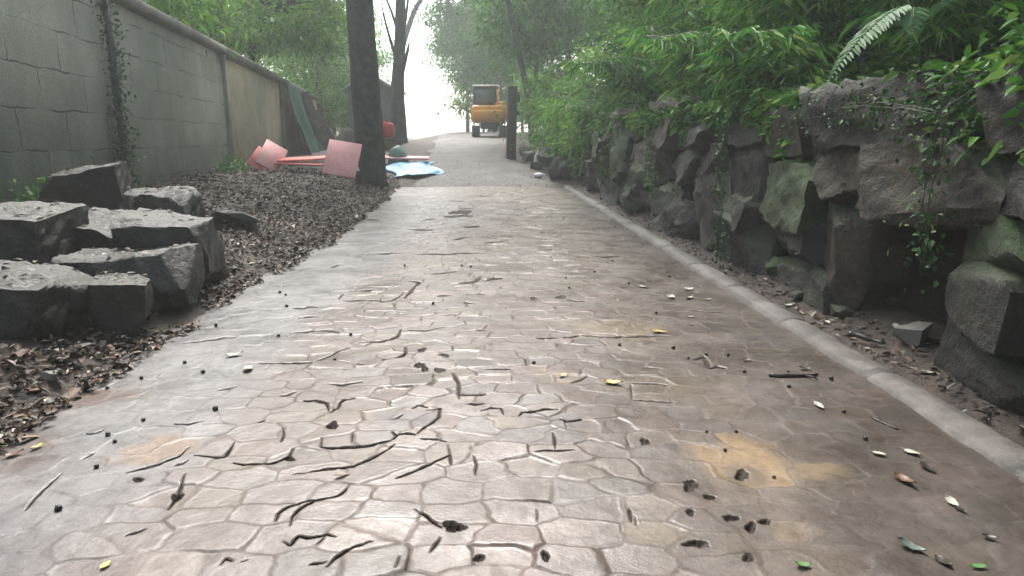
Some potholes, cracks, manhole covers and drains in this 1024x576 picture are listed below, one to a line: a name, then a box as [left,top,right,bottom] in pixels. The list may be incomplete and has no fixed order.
crack [258,201,502,365]
crack [520,409,581,452]
crack [125,372,503,567]
